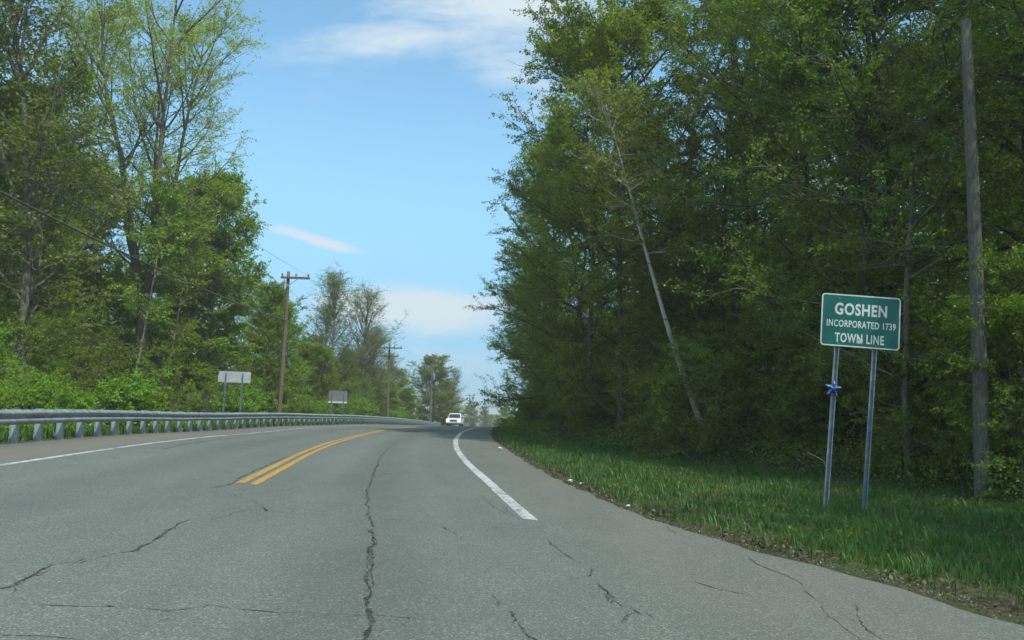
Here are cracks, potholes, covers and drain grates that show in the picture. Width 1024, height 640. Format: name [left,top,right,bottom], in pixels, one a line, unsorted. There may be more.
crack [749,558,880,640]
crack [548,541,653,622]
crack [0,446,528,640]
crack [492,595,537,640]
